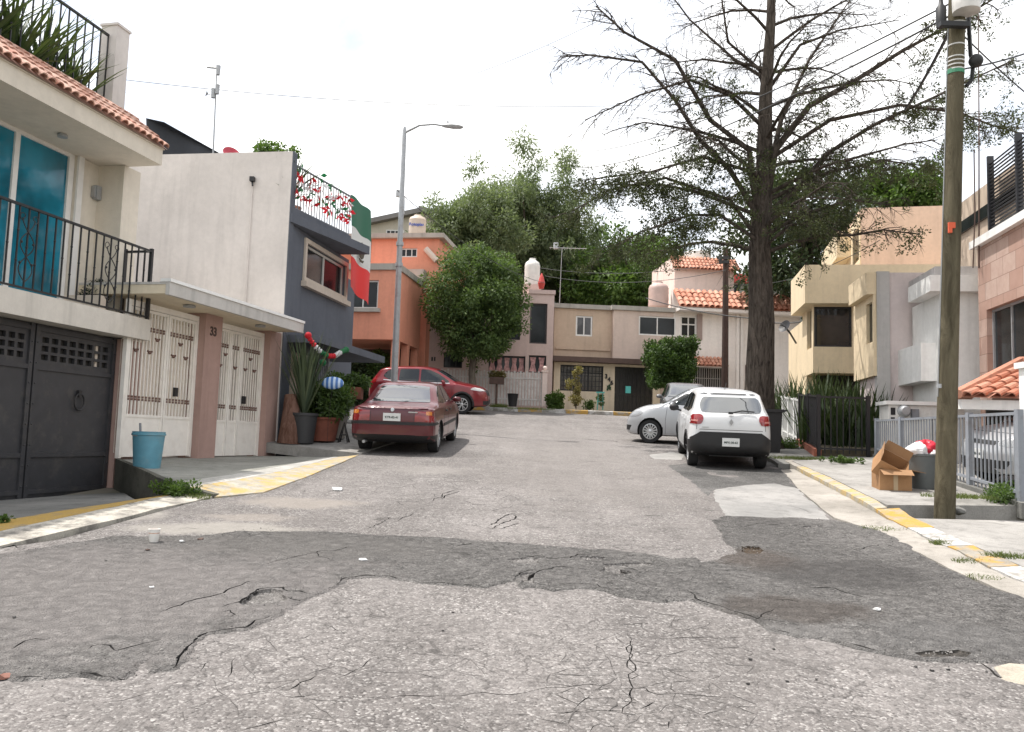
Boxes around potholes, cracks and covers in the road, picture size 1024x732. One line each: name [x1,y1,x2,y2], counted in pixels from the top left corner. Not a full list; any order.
crack [370,468,537,529]
pothole [740,546,764,554]
crack [392,587,909,732]
crack [24,581,484,729]
